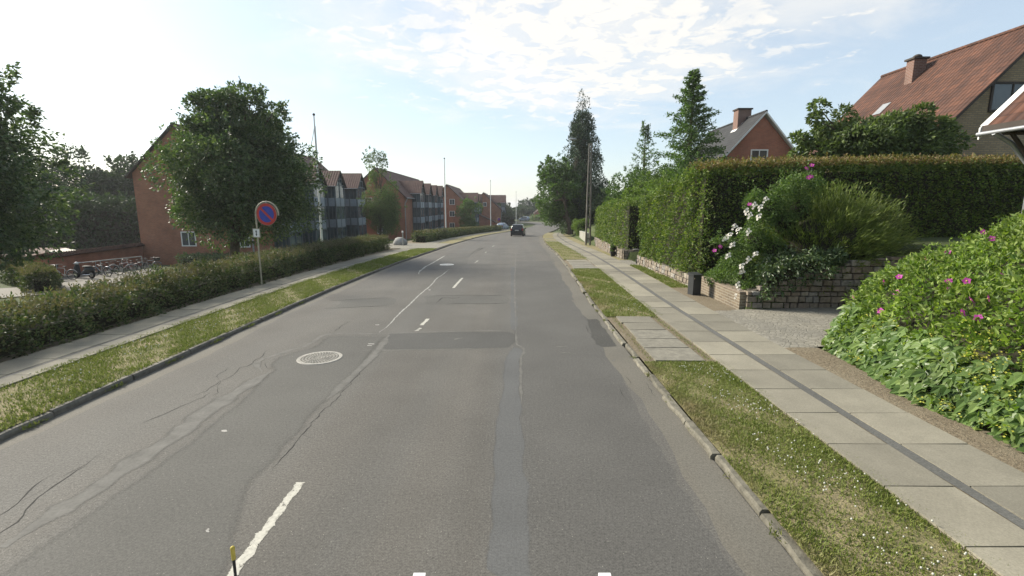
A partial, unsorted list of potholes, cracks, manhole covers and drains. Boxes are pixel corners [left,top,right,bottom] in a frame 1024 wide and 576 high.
crack [150,351,267,420]
manhole cover [296,351,343,365]
crack [0,453,101,533]
